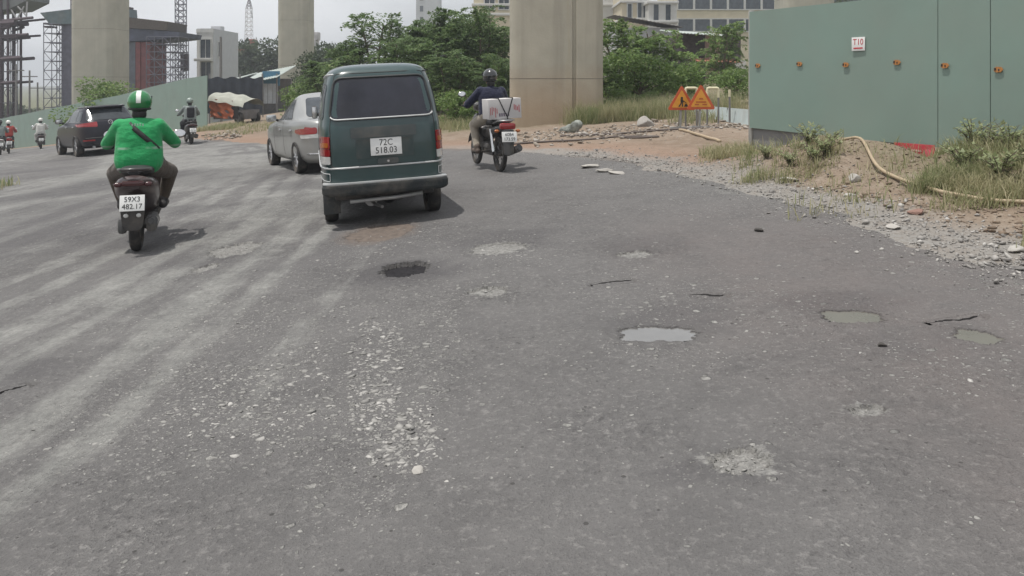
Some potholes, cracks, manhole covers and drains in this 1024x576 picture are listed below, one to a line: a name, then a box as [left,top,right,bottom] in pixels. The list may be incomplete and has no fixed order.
pothole [454,282,520,300]
pothole [802,307,905,328]
pothole [683,438,797,487]
crack [591,279,633,287]
pothole [367,259,442,281]
crack [0,384,30,397]
crack [923,314,985,325]
pothole [605,248,664,261]
pothole [196,240,272,261]
pothole [459,240,538,258]
pothole [600,322,716,347]
pothole [933,324,1024,351]
